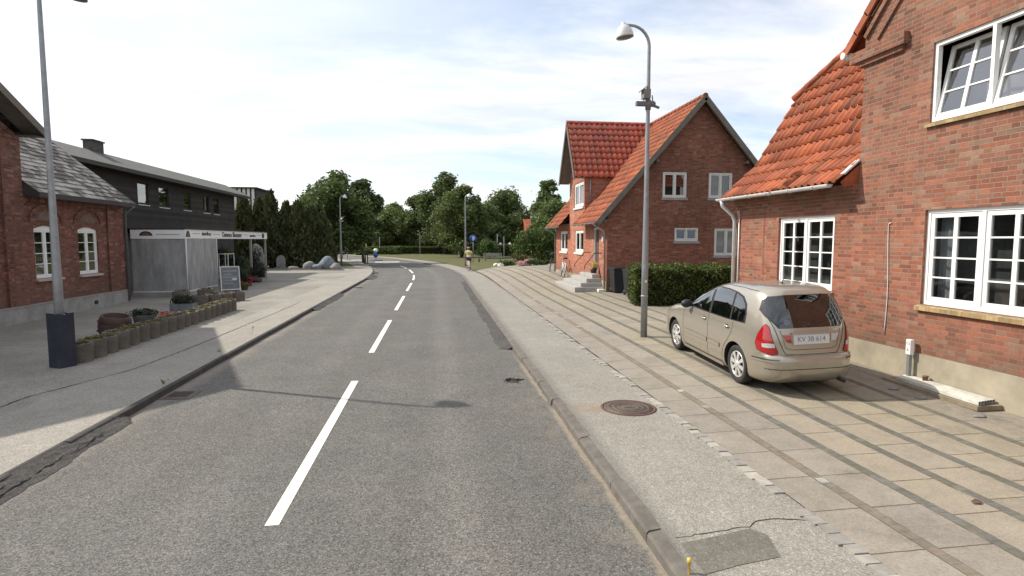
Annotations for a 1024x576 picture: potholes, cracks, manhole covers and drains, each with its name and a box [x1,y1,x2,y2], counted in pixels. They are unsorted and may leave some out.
manhole cover [600,400,657,416]
drain grate [157,390,203,400]
crack [677,518,800,538]
